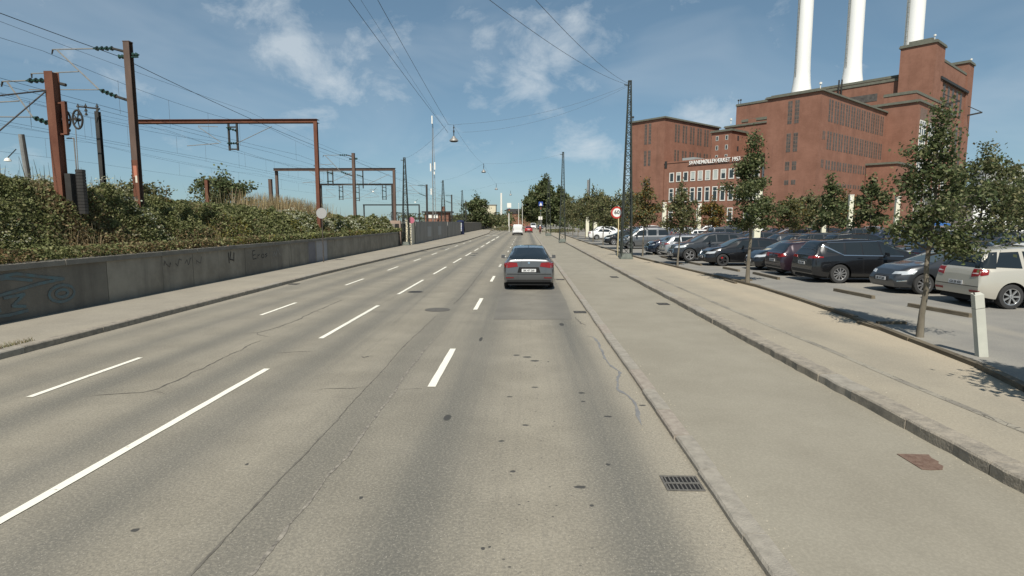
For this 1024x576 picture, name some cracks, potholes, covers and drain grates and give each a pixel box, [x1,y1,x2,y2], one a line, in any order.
drain grate [659,475,706,491]
crack [93,300,450,576]
manhole cover [897,454,943,470]
